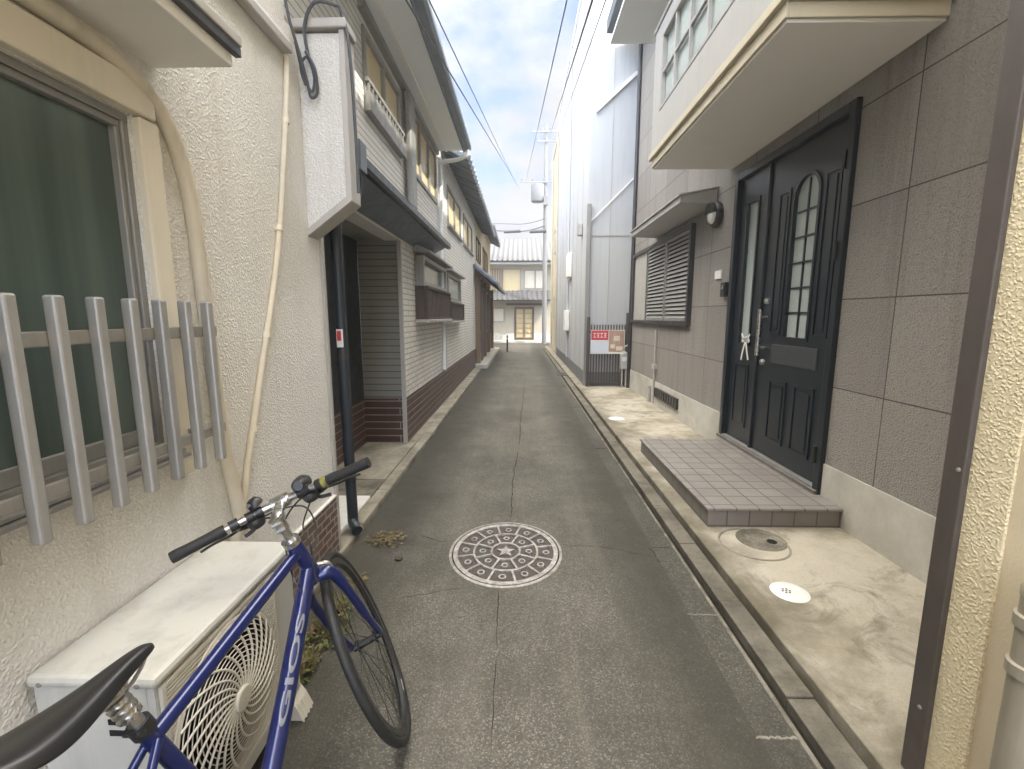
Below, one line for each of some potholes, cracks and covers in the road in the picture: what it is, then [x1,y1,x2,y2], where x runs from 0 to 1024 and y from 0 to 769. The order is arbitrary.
crack [510,384,524,520]
manhole cover [449,522,562,588]
crack [490,591,499,759]
